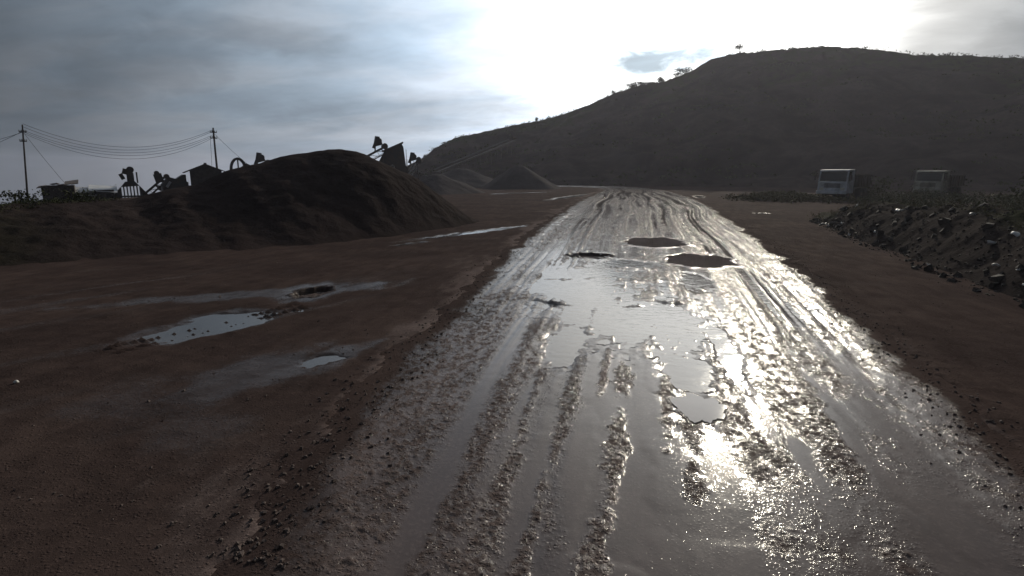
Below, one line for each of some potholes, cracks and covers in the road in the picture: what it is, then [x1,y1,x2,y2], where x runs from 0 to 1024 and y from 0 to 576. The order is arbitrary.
pothole [658,252,748,270]
pothole [616,236,695,249]
pothole [287,285,337,299]
